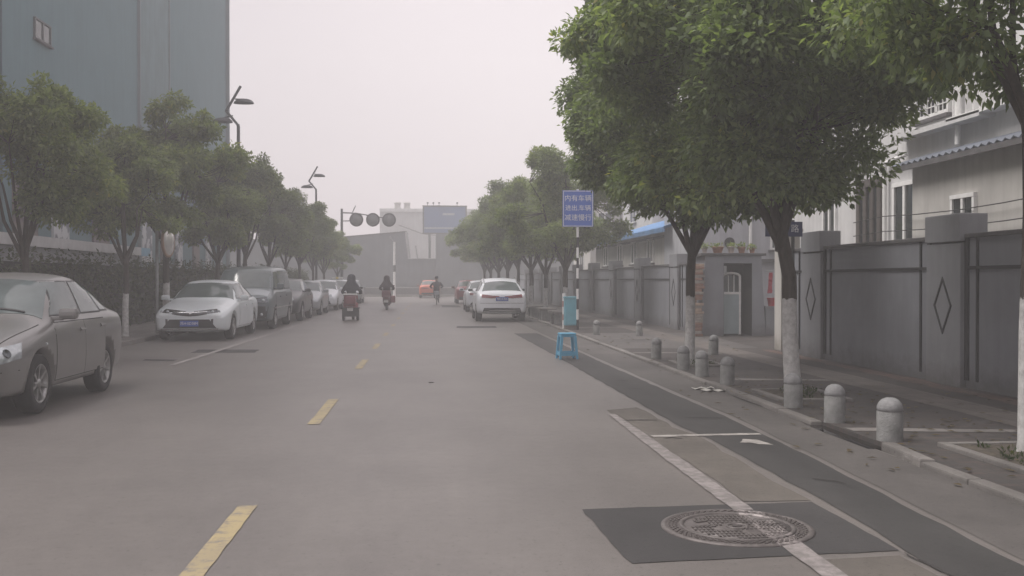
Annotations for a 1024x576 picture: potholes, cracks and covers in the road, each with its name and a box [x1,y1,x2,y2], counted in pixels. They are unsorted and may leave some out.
manhole cover [661,509,816,548]
